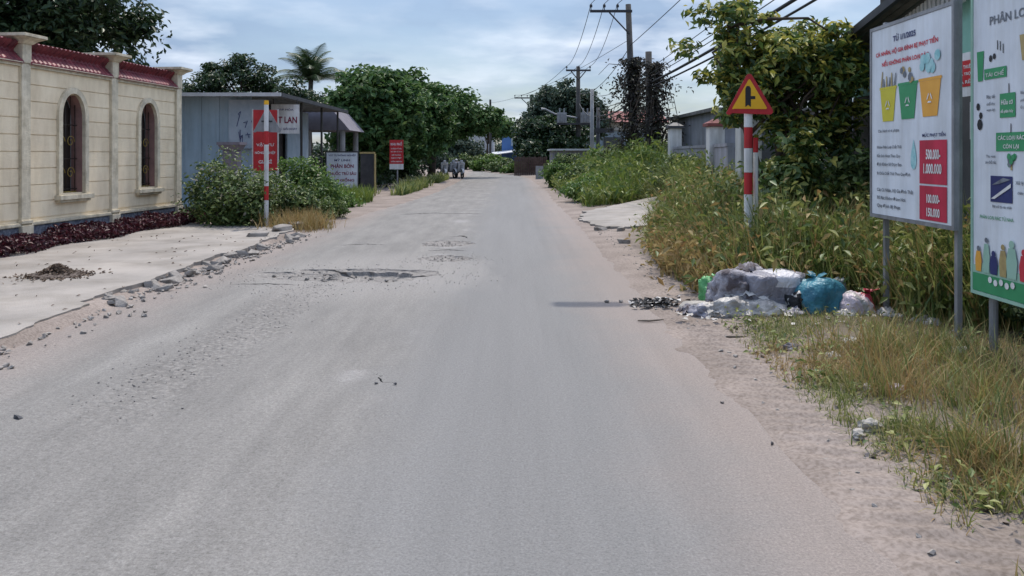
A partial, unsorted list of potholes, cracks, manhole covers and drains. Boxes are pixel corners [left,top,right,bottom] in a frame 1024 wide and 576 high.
pothole [247,268,441,283]
